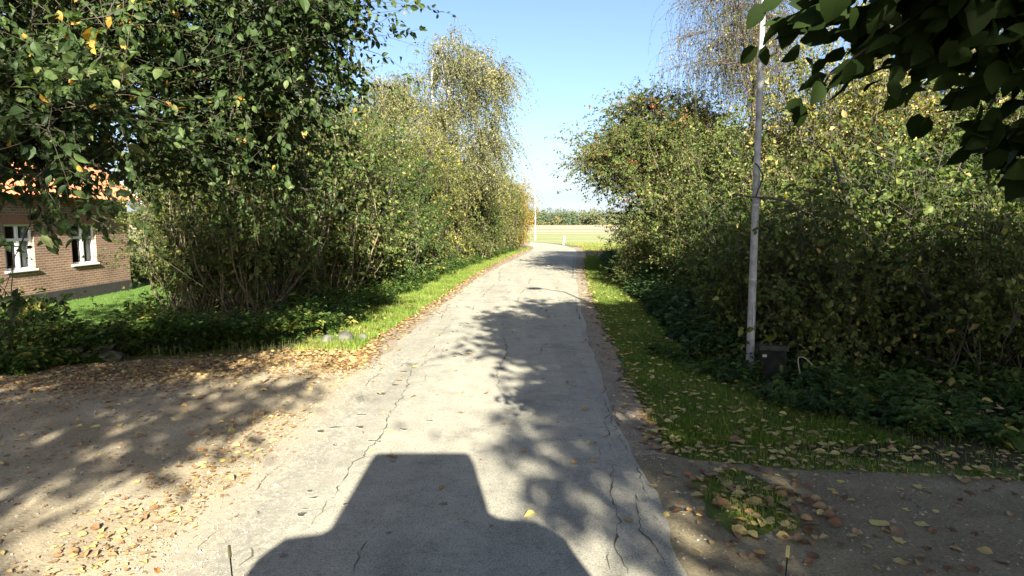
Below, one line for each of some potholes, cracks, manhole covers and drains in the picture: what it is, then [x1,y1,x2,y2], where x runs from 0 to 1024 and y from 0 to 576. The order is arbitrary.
crack [597,385,668,573]
crack [312,305,448,523]
